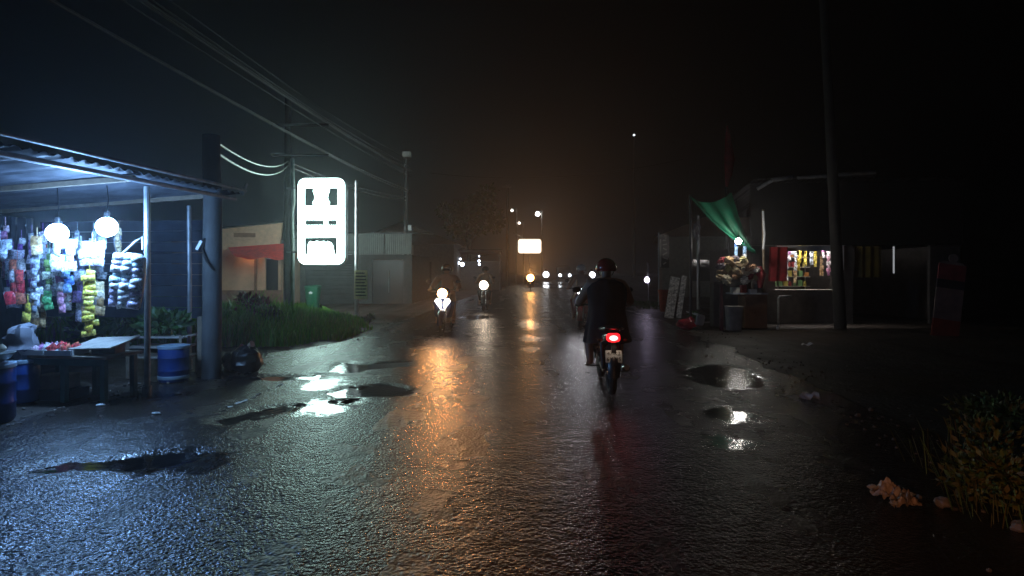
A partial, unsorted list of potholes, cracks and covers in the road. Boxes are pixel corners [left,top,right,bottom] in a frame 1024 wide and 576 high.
pothole [217,406,296,425]
pothole [31,452,197,474]
pothole [327,385,414,398]
pothole [689,364,765,390]
